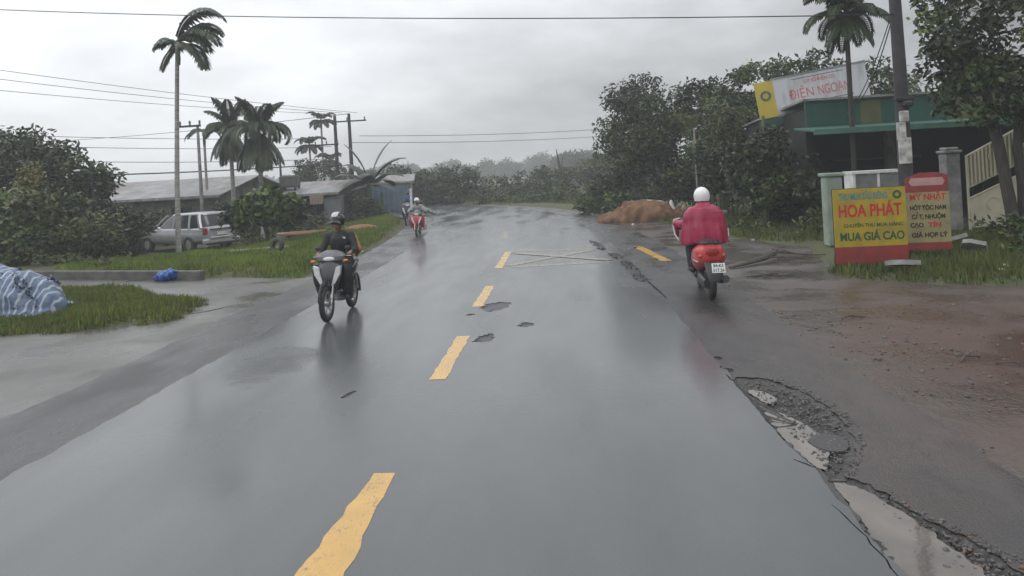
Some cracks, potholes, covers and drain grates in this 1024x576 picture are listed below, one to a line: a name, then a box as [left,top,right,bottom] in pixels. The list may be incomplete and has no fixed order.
pothole [730,376,867,482]
pothole [826,473,1024,576]
pothole [474,334,494,342]
pothole [482,302,510,312]
